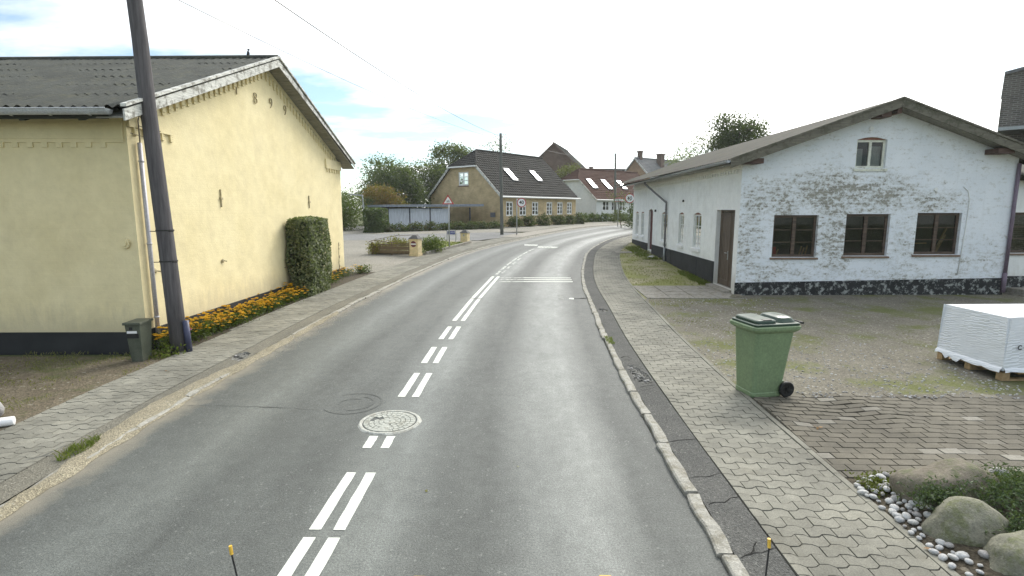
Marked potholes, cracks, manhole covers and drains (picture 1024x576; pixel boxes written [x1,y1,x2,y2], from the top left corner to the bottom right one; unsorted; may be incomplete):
manhole cover [358,410,422,435]
crack [729,523,776,558]
